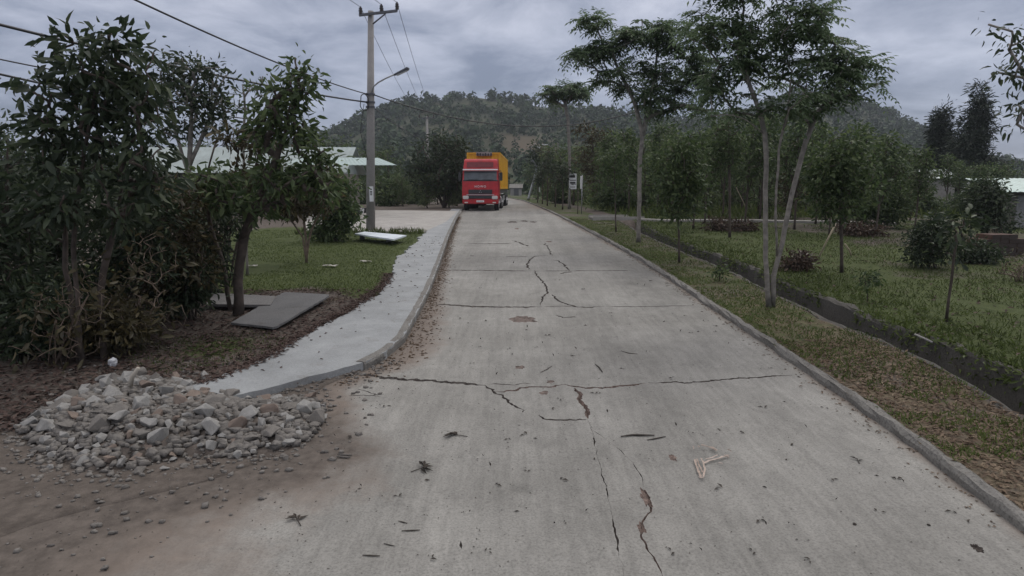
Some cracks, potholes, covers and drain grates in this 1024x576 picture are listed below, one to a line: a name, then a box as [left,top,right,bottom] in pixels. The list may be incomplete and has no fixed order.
crack [349,374,663,576]
crack [506,240,661,318]
